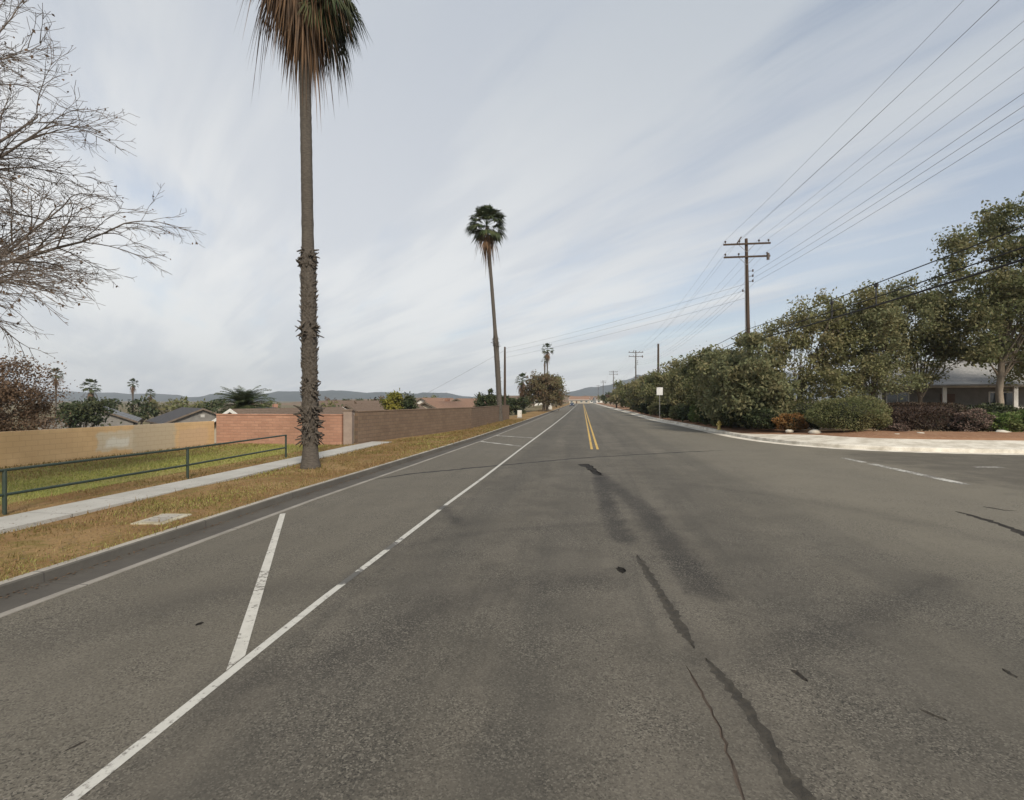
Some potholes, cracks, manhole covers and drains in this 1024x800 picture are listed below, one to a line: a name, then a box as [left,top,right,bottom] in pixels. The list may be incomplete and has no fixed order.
crack [920,709,947,721]
crack [686,666,745,800]
crack [790,669,808,682]
crack [955,506,1024,536]
